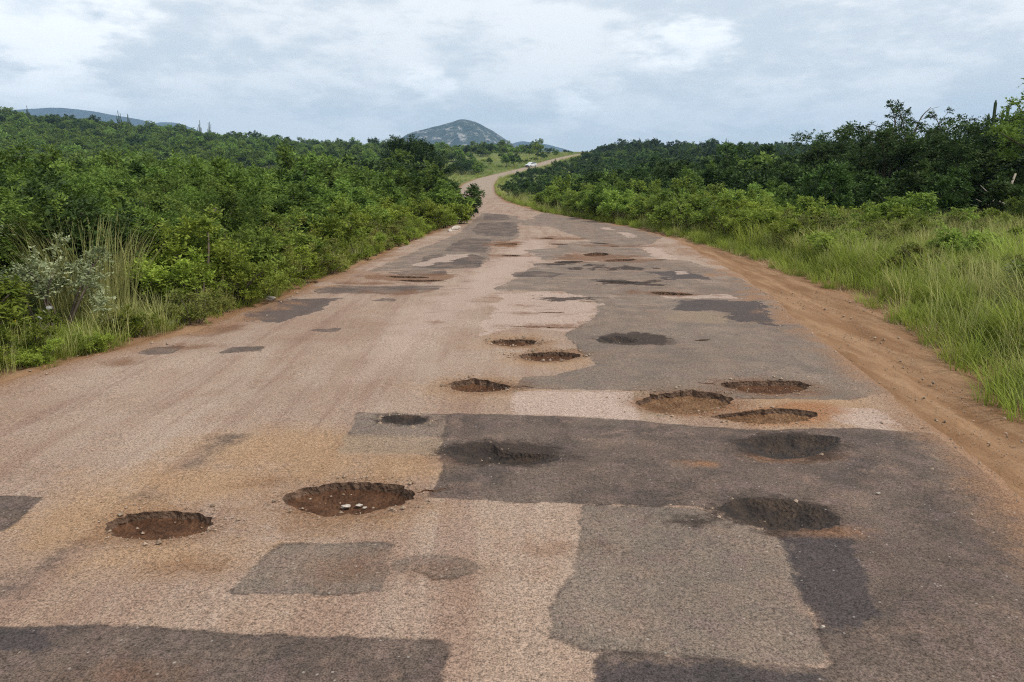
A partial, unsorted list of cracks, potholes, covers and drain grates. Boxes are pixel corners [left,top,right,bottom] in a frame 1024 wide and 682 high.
pothole [105,511,213,540]
pothole [283,482,415,517]
pothole [635,389,734,414]
pothole [720,380,811,394]
